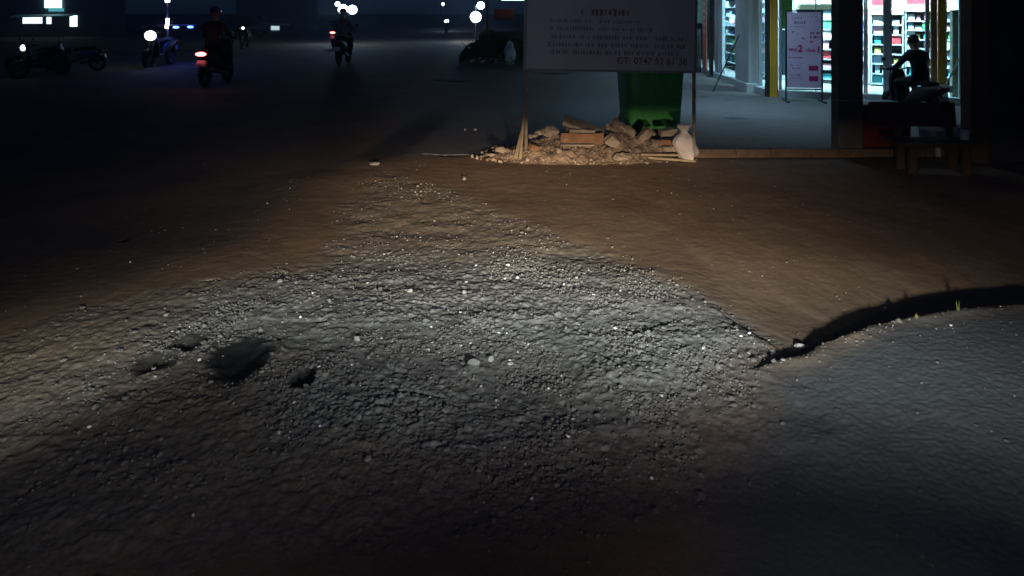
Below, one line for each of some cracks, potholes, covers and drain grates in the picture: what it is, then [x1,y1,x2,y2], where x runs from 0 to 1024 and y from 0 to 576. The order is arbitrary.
pothole [165,331,208,352]
pothole [287,366,317,389]
pothole [204,337,278,388]
pothole [127,350,185,378]
